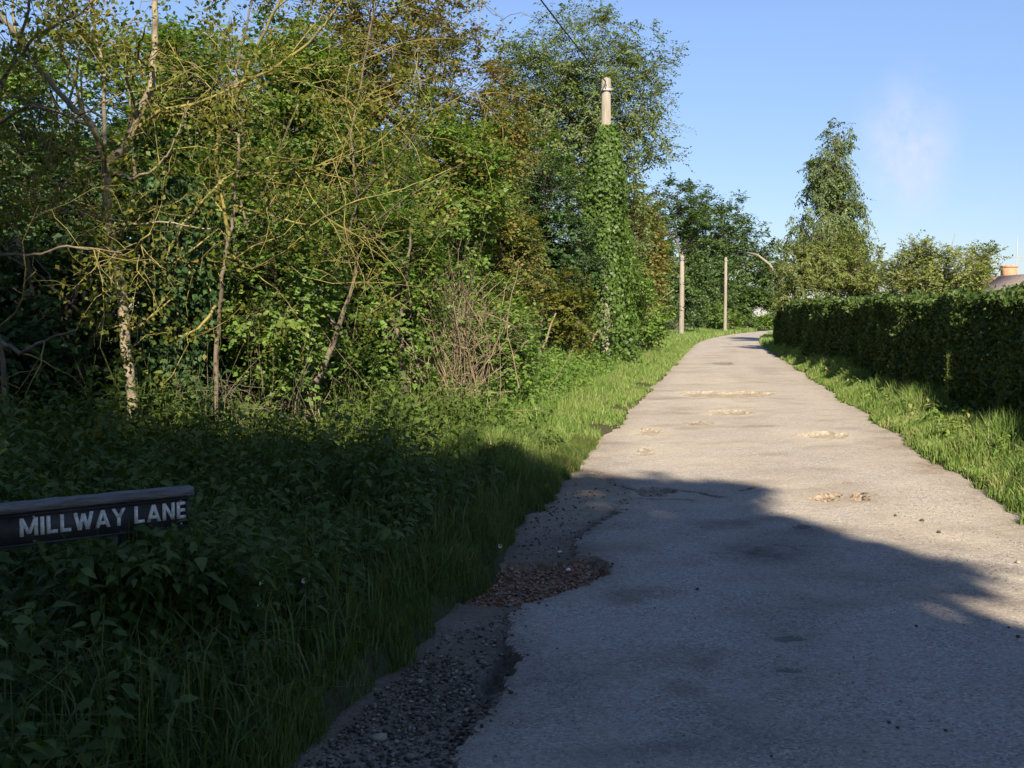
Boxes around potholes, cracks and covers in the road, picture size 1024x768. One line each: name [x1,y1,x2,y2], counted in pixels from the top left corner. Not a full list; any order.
pothole [848,492,872,501]
pothole [805,493,846,502]
pothole [792,431,850,439]
pothole [634,447,655,456]
pothole [633,485,680,497]
pothole [461,559,610,608]
pothole [630,428,669,436]
pothole [471,645,524,704]
